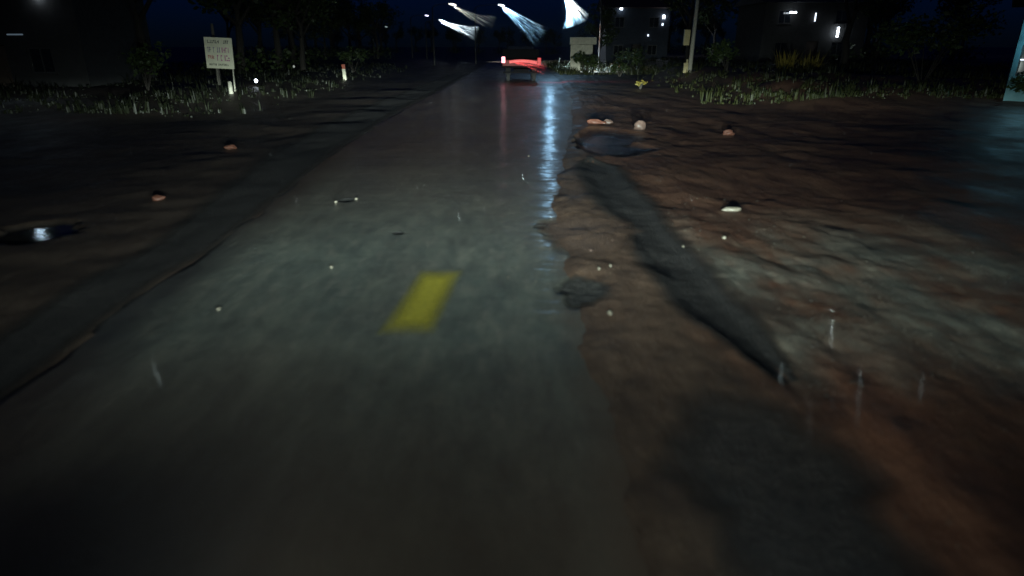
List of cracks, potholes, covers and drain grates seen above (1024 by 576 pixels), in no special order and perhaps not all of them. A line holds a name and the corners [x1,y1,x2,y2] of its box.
pothole [556,276,608,306]
pothole [578,132,646,156]
